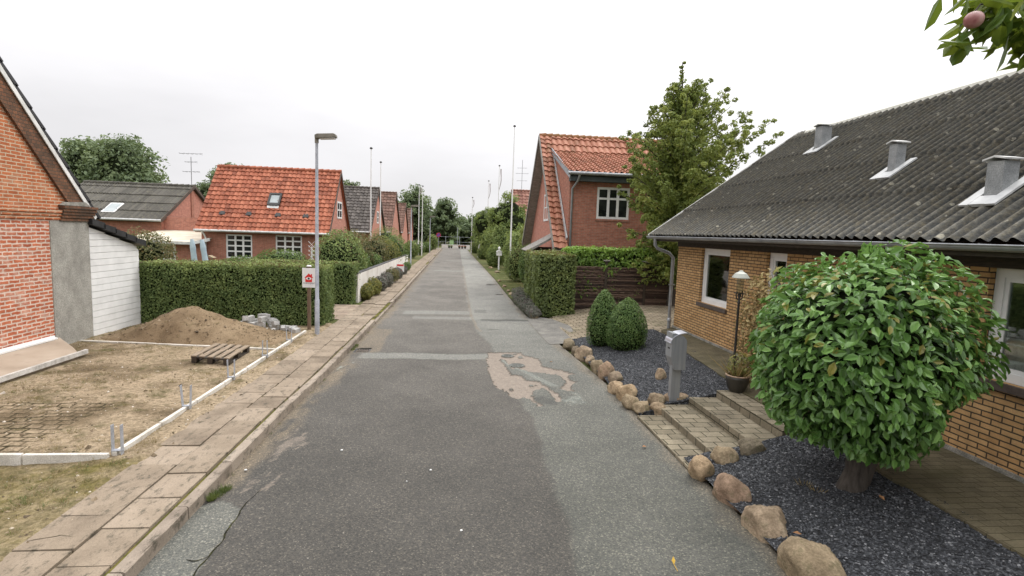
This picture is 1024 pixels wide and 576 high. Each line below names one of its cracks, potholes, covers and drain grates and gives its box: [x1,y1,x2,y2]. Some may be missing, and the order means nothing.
crack [186,491,259,576]
